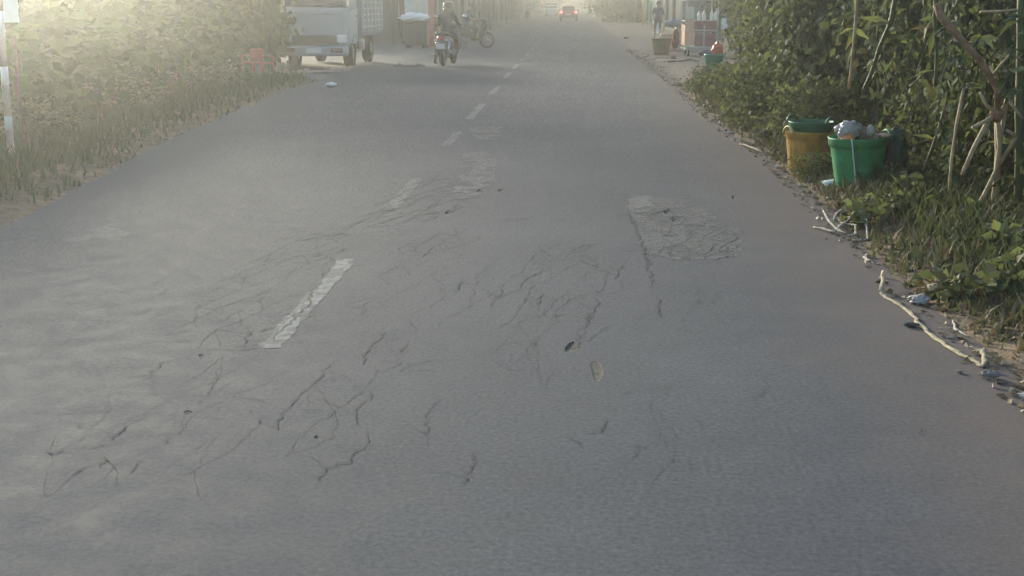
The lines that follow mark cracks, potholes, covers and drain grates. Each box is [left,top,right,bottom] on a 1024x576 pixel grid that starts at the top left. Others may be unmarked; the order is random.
crack [620,384,682,490]
crack [344,227,632,389]
crack [43,171,482,495]
